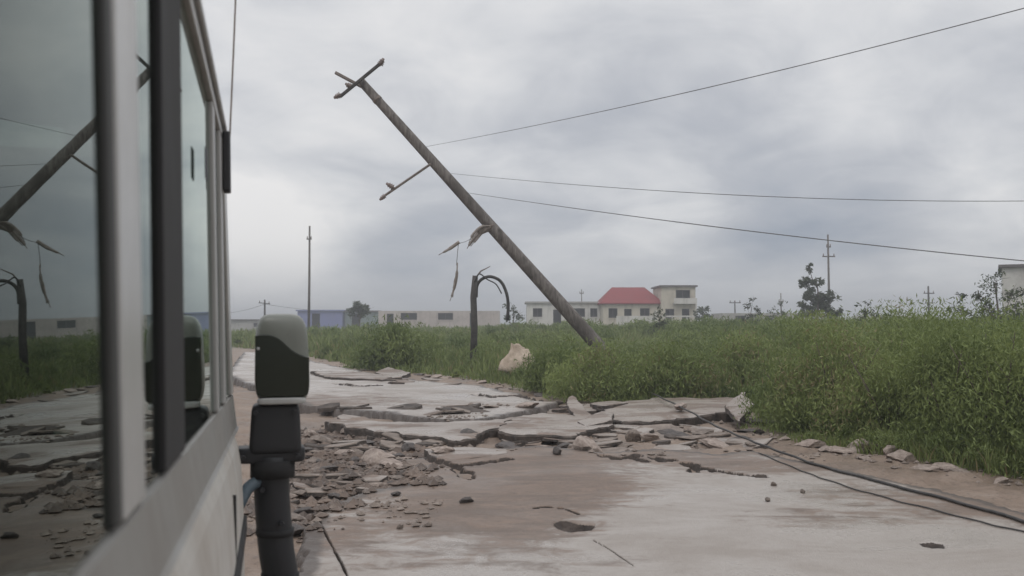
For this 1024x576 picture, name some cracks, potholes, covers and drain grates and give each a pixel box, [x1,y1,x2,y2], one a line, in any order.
pothole [554,521,595,533]
crack [532,506,580,515]
crack [428,456,515,480]
crack [597,453,769,478]
crack [471,393,546,402]
pothole [290,431,428,525]
